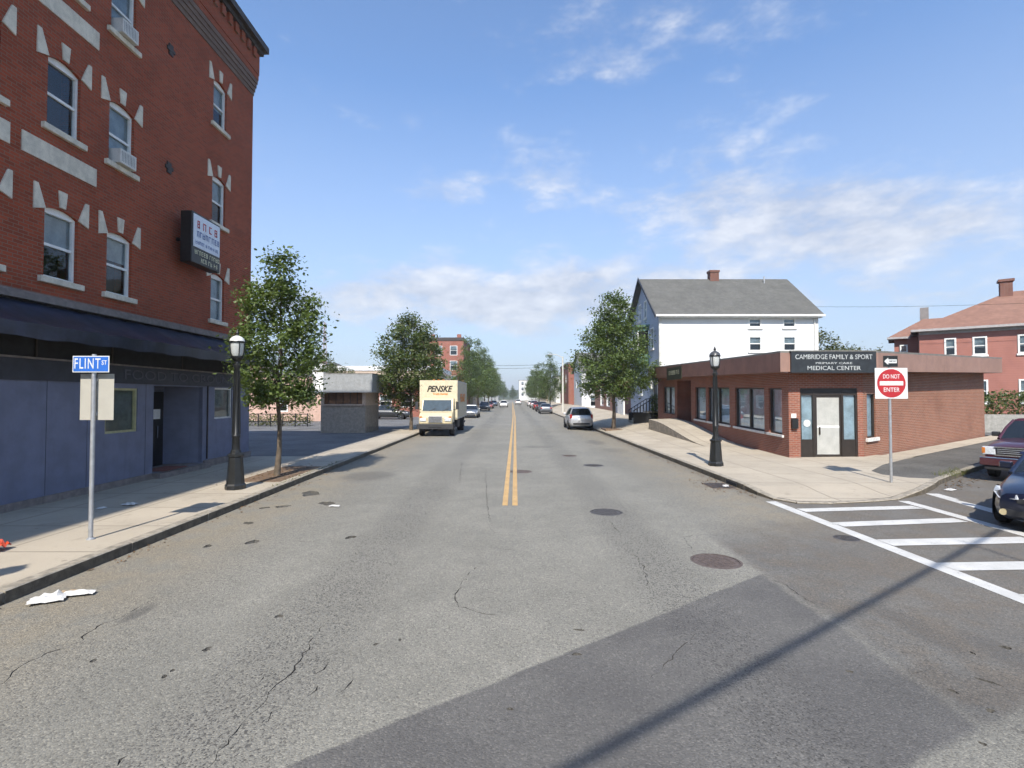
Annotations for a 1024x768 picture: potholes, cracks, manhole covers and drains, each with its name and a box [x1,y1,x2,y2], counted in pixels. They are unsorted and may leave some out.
manhole cover [690,553,743,569]
crack [2,602,148,684]
crack [454,563,532,615]
crack [180,627,327,768]
